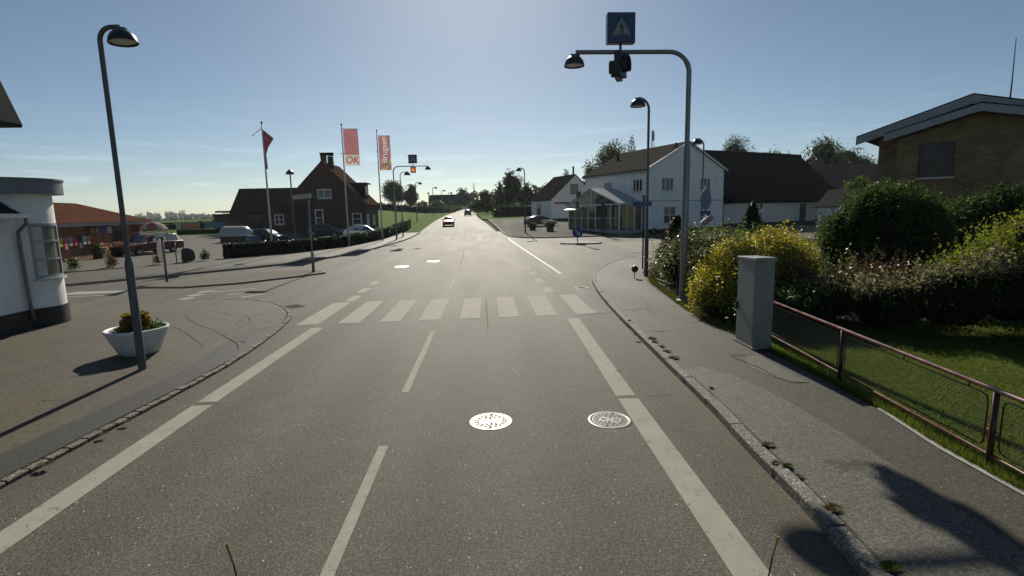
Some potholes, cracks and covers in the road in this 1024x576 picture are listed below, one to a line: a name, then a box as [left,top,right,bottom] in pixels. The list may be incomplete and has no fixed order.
manhole cover [469,413,512,430]
manhole cover [588,411,632,429]
crack [154,302,289,348]
